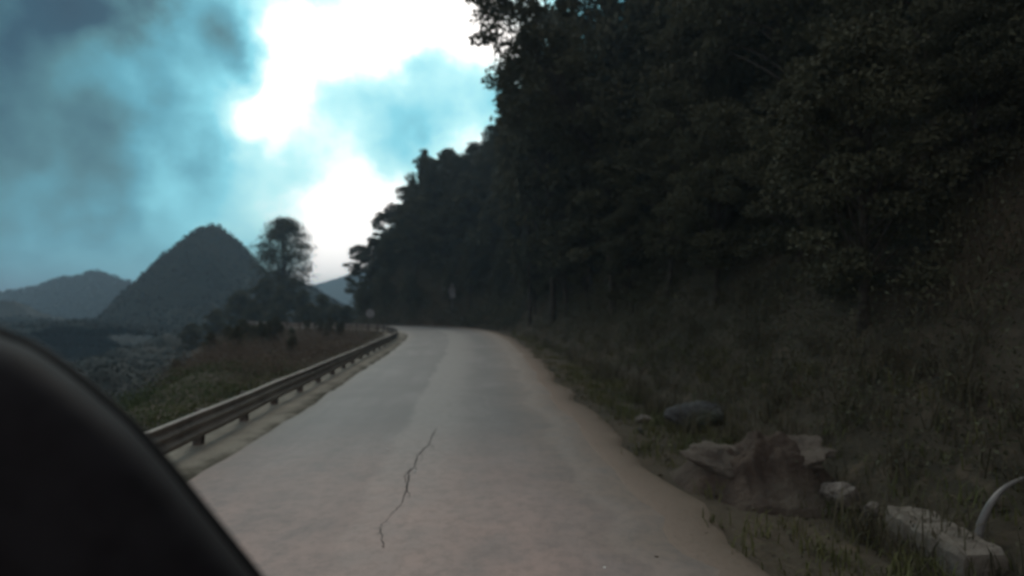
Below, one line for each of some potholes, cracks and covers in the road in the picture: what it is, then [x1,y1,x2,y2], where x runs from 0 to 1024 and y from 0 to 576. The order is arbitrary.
crack [378,428,437,548]
